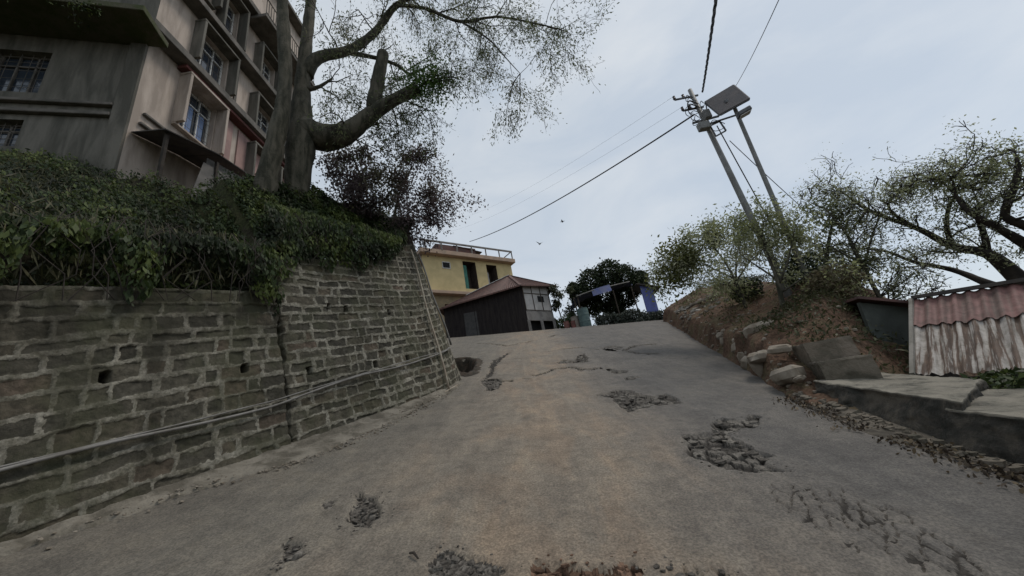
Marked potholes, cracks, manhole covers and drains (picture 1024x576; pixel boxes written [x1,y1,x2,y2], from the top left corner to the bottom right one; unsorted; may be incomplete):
pothole [476,378,518,392]
pothole [414,537,522,576]
crack [634,475,1024,576]
pothole [590,389,688,413]
pothole [245,535,325,576]
pothole [333,489,395,534]
pothole [553,353,592,365]
pothole [519,551,662,576]
crack [529,344,663,377]
crack [479,341,533,380]
pothole [673,413,807,477]
